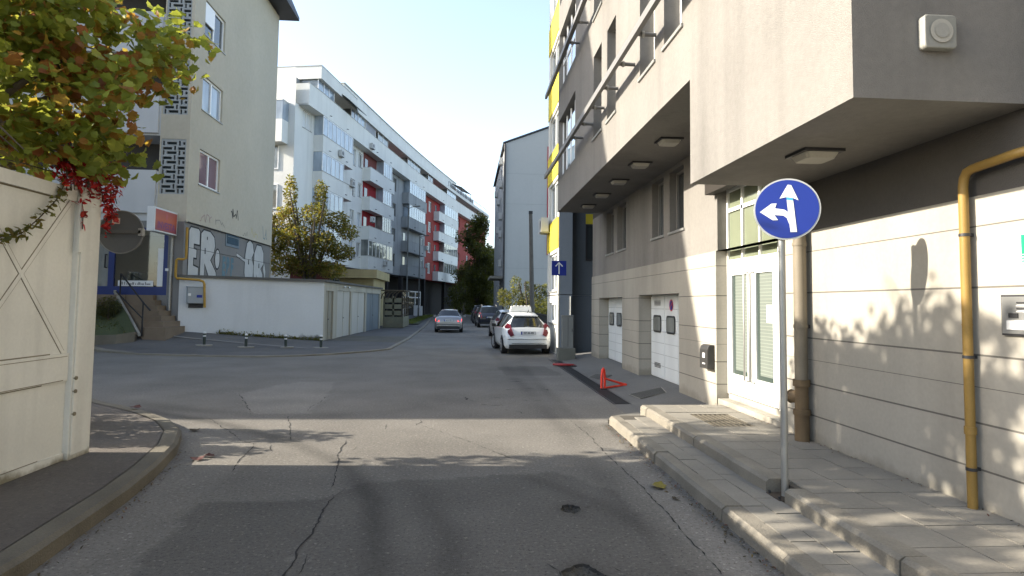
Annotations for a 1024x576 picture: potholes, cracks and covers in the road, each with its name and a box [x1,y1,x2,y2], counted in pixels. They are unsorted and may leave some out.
drain grate [690,414,757,427]
crack [211,419,271,470]
pothole [561,564,607,576]
crack [282,442,354,576]
pothole [561,504,581,514]
